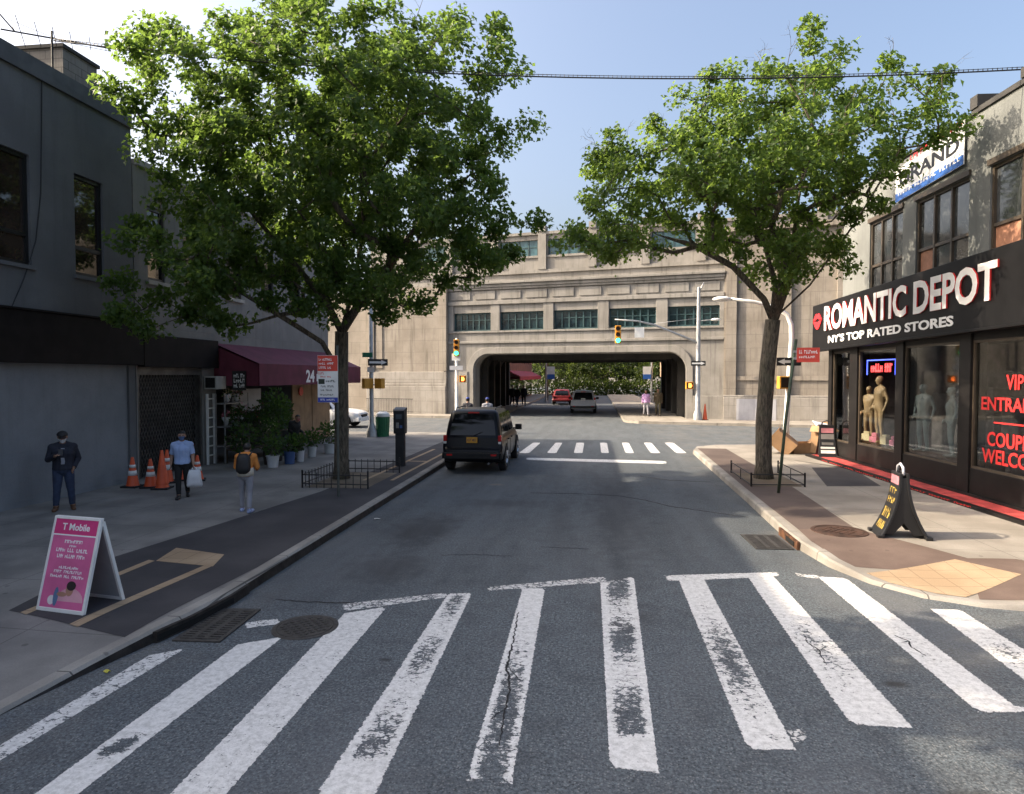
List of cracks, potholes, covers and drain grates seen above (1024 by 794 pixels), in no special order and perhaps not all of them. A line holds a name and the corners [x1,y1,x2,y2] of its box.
drain grate [172,608,261,643]
manhole cover [810,525,869,538]
crack [556,493,744,517]
crack [491,612,522,746]
manhole cover [271,615,339,640]
drain grate [740,534,794,550]
